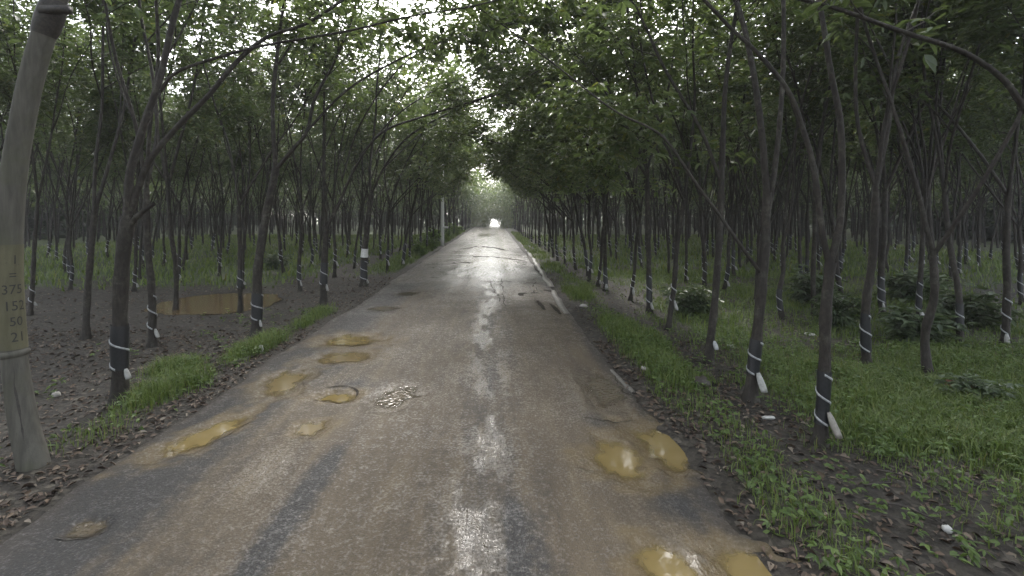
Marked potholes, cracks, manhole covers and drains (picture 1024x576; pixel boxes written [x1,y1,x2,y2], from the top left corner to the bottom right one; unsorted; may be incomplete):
crack [484,278,552,306]
pothole [54,514,115,541]
pothole [617,418,709,480]
pothole [300,348,380,368]
pothole [133,405,266,465]
pothole [305,331,390,348]
pothole [613,532,716,576]
pothole [308,390,365,404]
pothole [359,304,407,313]
pothole [570,431,662,493]
pothole [360,381,429,414]
